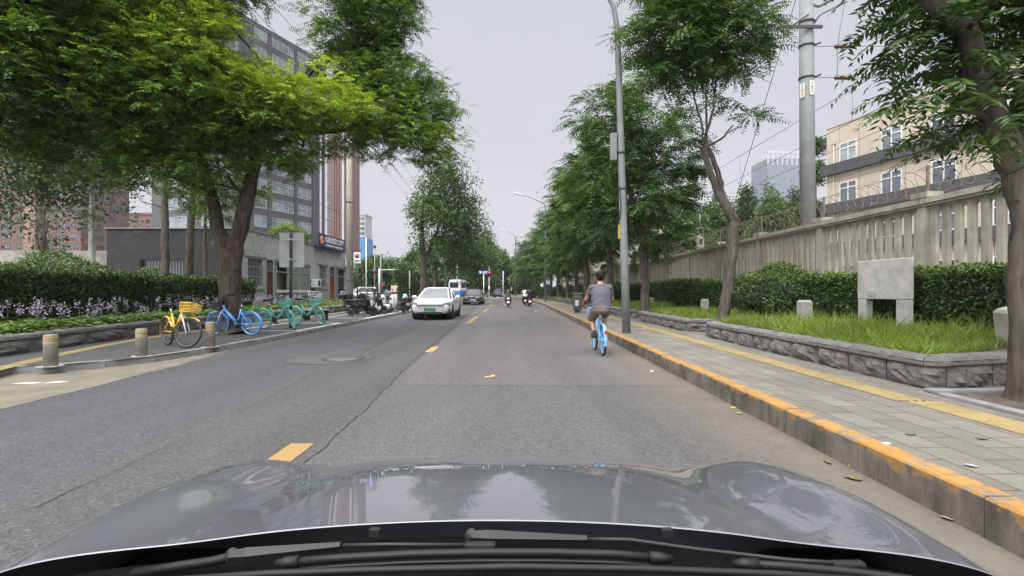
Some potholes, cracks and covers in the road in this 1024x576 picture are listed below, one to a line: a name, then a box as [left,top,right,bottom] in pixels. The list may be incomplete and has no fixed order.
manhole cover [284,353,374,364]
crack [304,306,487,463]
